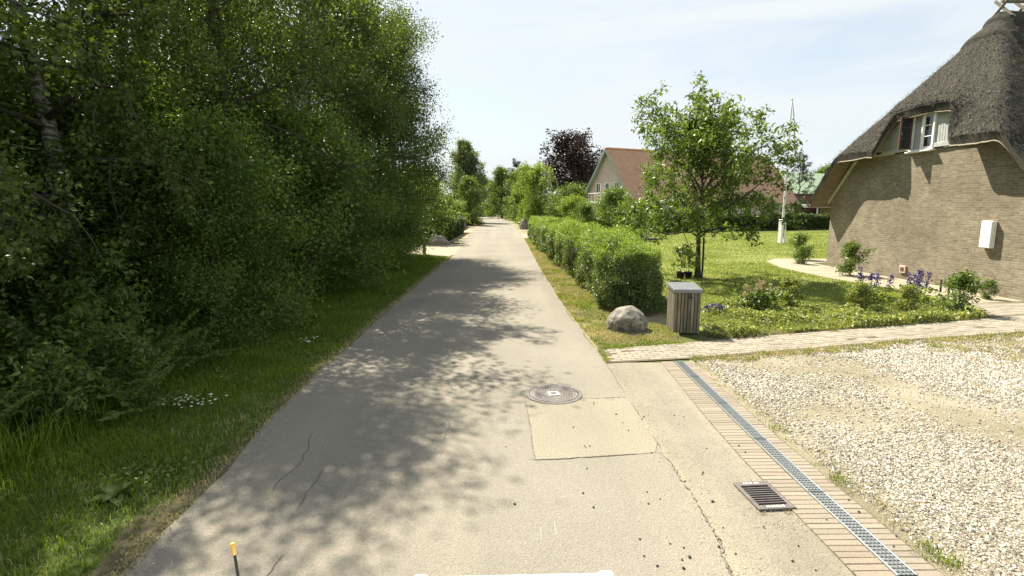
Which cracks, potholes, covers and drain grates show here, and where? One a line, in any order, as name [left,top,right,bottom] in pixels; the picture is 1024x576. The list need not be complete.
manhole cover [525,384,582,404]
drain grate [733,481,797,511]
crack [527,362,733,576]
crack [273,438,326,510]
